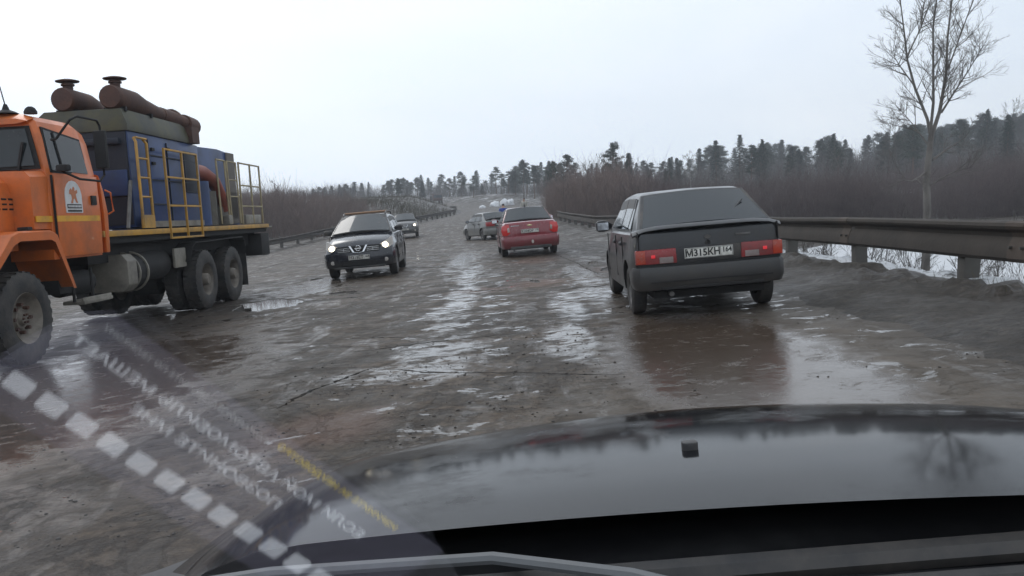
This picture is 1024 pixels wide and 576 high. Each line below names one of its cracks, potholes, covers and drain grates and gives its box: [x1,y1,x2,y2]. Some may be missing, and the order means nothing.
crack [277,333,626,409]
pothole [232,298,305,312]
